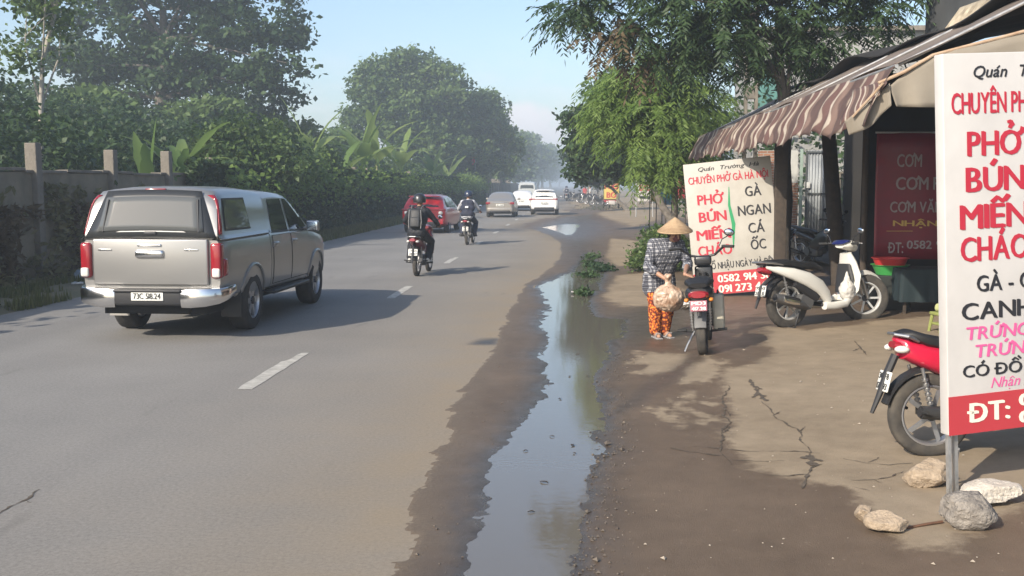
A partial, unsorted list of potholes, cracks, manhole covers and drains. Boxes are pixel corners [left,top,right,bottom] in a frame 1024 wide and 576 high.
crack [843,457,903,491]
crack [700,379,823,488]
